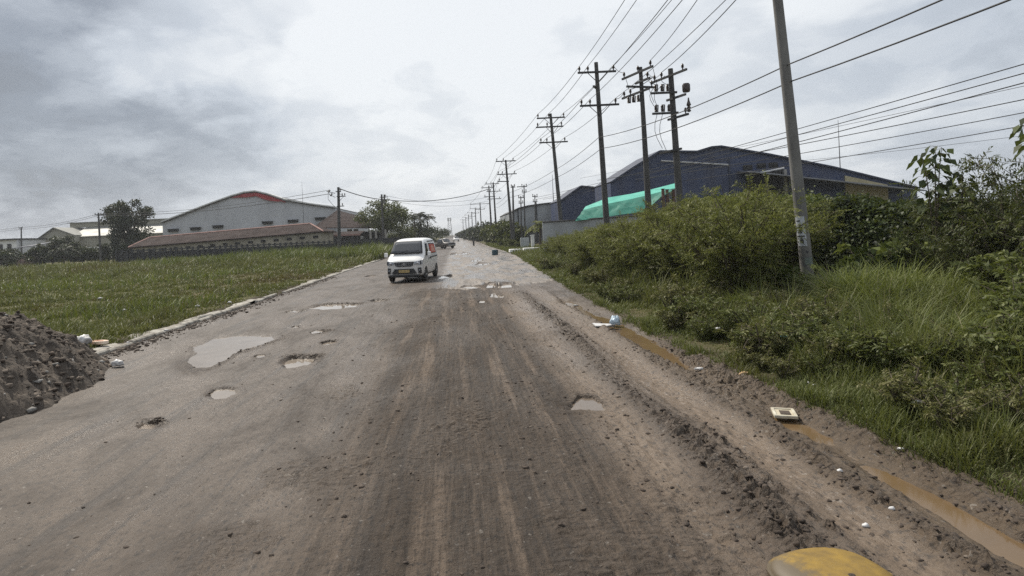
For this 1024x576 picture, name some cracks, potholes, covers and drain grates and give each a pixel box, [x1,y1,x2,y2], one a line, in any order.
pothole [201,386,247,403]
pothole [496,281,515,289]
pothole [295,302,368,312]
pothole [271,353,325,371]
pothole [123,416,172,434]
pothole [164,328,297,377]
pothole [552,391,618,415]
pothole [315,339,344,347]
